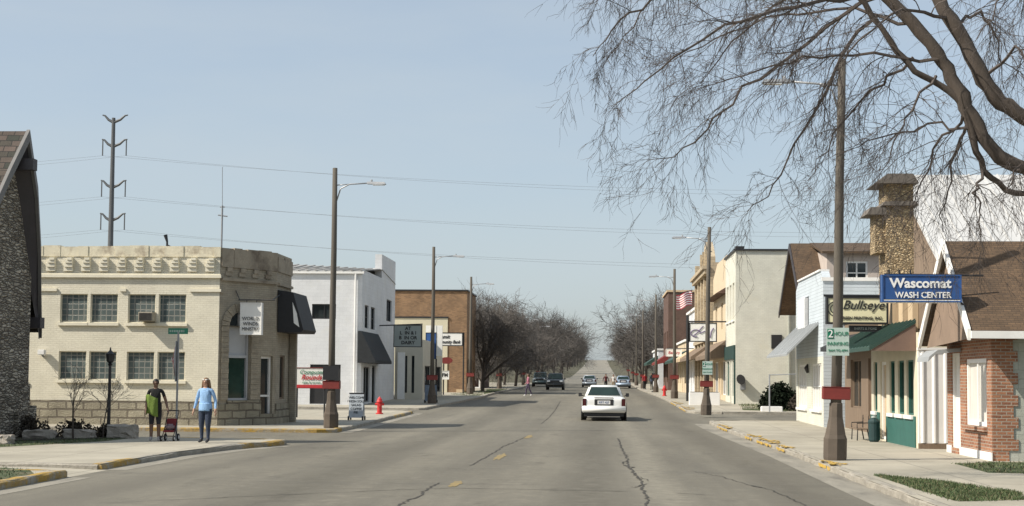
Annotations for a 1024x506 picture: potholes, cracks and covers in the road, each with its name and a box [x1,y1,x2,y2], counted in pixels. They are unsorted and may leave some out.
crack [617,438,649,506]
crack [689,470,806,506]
crack [398,482,440,506]
